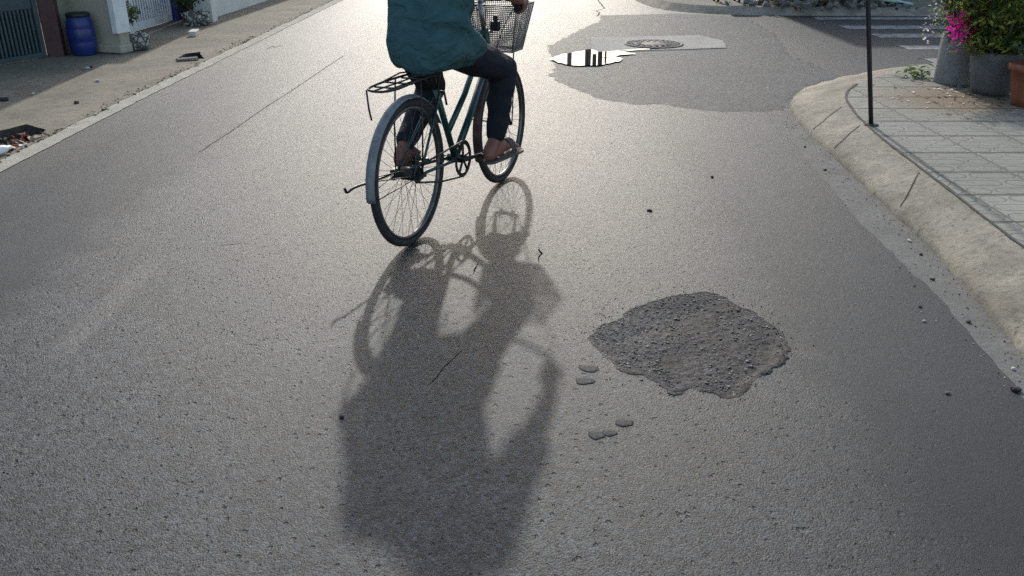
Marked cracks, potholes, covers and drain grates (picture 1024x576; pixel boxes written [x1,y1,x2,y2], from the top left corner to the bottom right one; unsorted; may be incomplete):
manhole cover [624,39,683,49]
crack [198,56,343,153]
